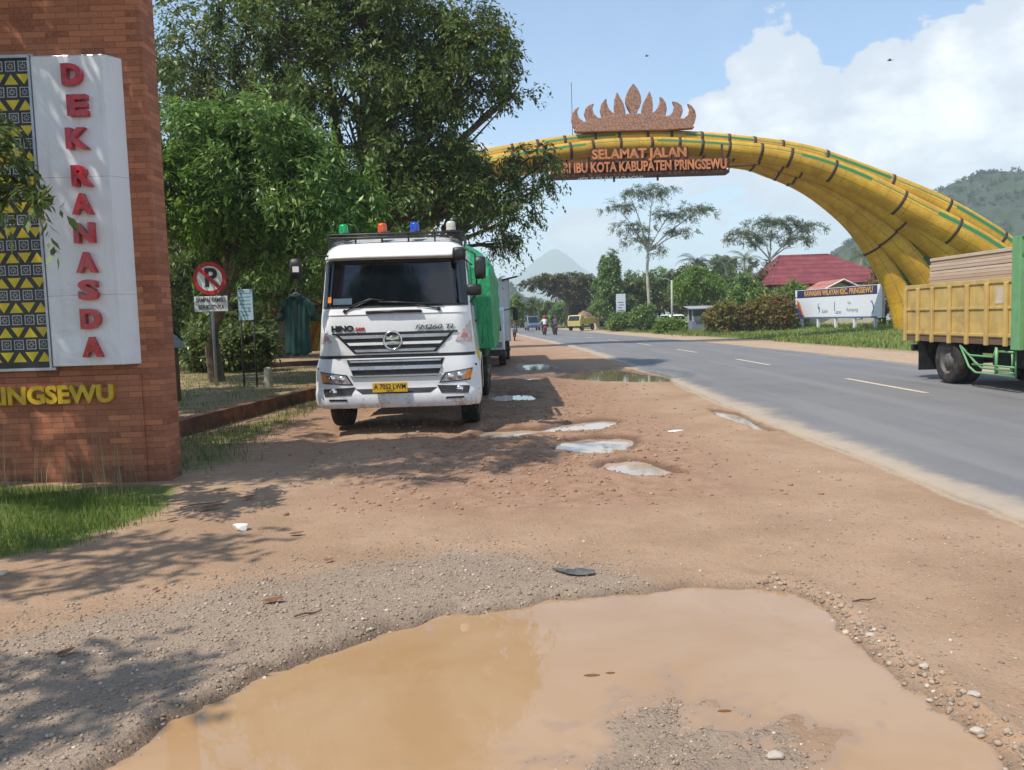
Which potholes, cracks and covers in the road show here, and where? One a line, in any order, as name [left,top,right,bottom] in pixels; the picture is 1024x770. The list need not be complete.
pothole [481,390,551,401]
pothole [505,361,569,371]
pothole [539,366,673,383]
pothole [456,415,636,441]
pothole [51,571,1024,770]
pothole [537,430,652,455]
pothole [585,452,701,477]
pothole [703,407,784,432]
